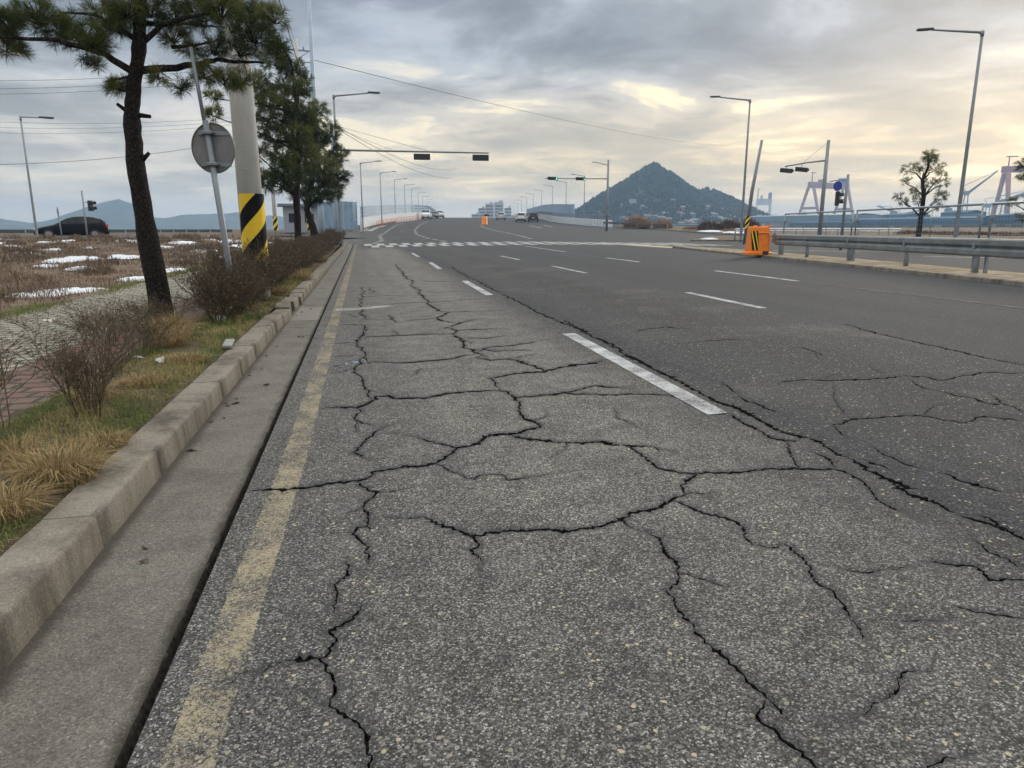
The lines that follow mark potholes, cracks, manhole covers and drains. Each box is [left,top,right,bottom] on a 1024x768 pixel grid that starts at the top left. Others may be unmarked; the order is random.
crack [114,247,1000,768]
